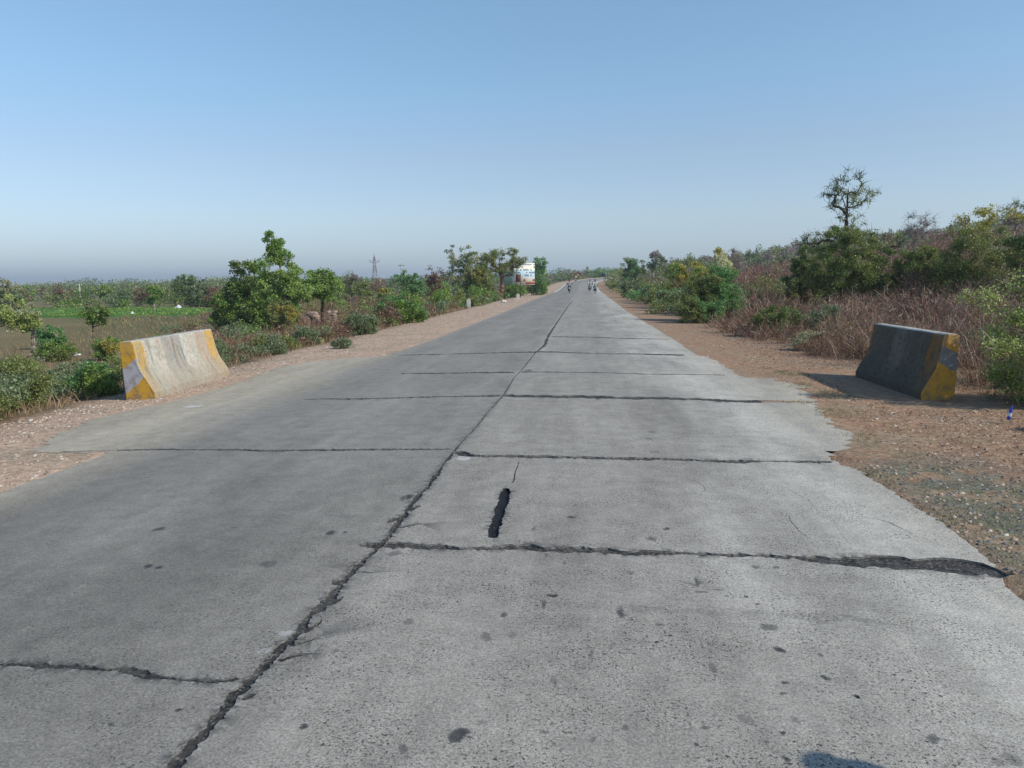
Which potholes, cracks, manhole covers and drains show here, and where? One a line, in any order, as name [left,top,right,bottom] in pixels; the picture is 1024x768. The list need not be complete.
pothole [488,488,511,538]
crack [0,301,1009,768]
